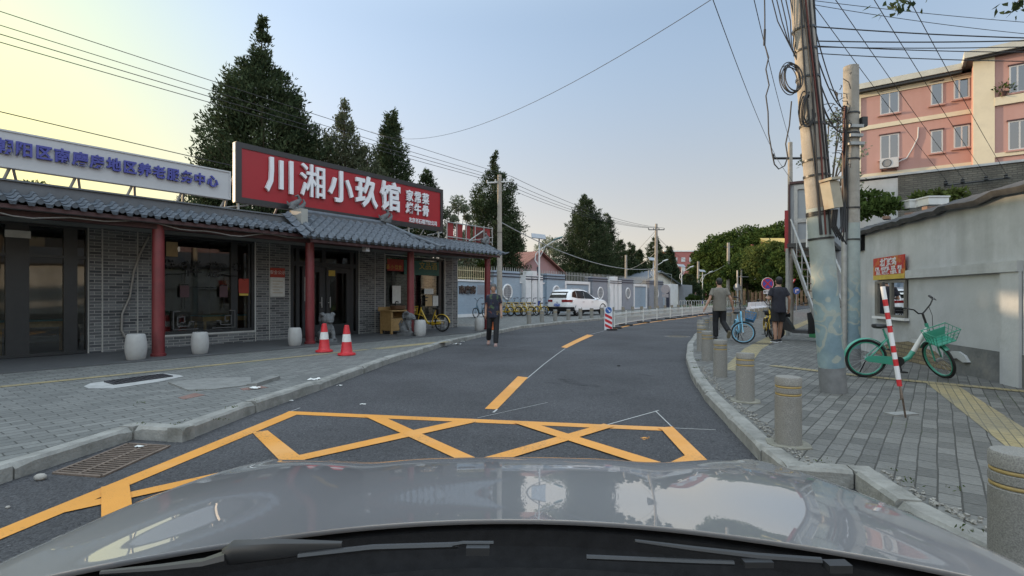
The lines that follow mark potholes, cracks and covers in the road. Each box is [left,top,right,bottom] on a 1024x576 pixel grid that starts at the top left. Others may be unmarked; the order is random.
drain grate [104,373,173,385]
drain grate [52,443,171,478]
